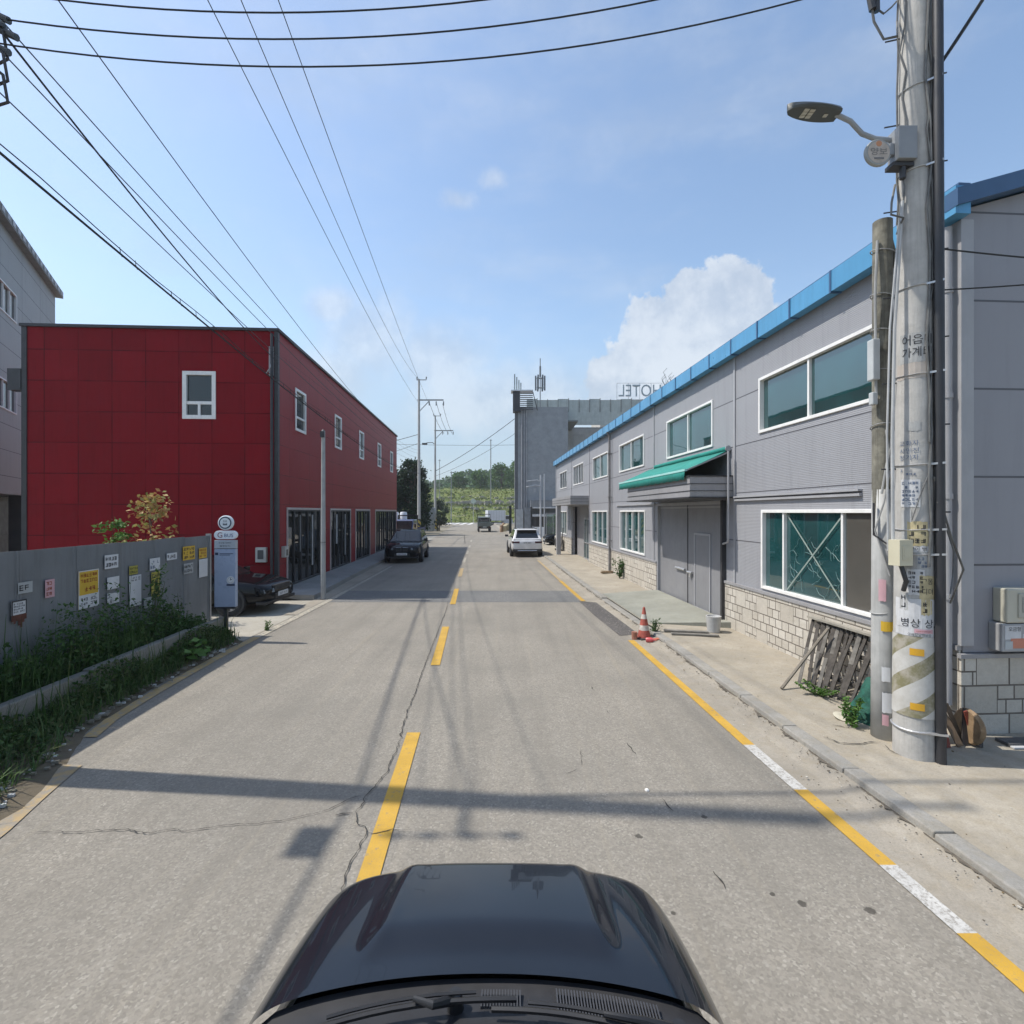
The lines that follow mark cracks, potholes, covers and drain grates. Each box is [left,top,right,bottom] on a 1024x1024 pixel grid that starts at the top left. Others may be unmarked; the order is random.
crack [31,607,447,891]
